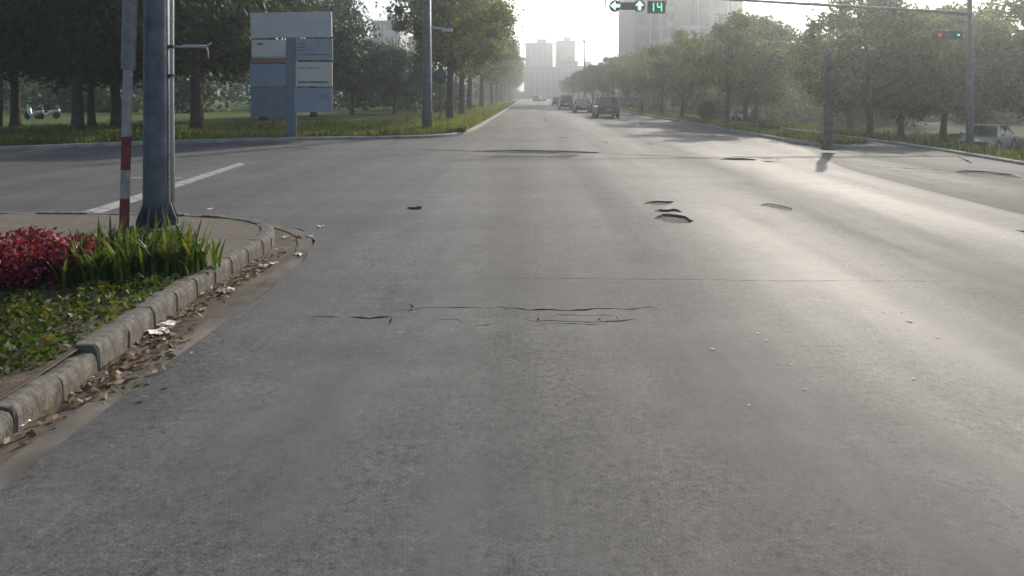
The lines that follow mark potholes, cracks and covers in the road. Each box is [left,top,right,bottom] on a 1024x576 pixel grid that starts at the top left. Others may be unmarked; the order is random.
pothole [654,214,693,224]
crack [318,303,661,326]
pothole [956,170,1020,178]
pothole [761,203,793,211]
